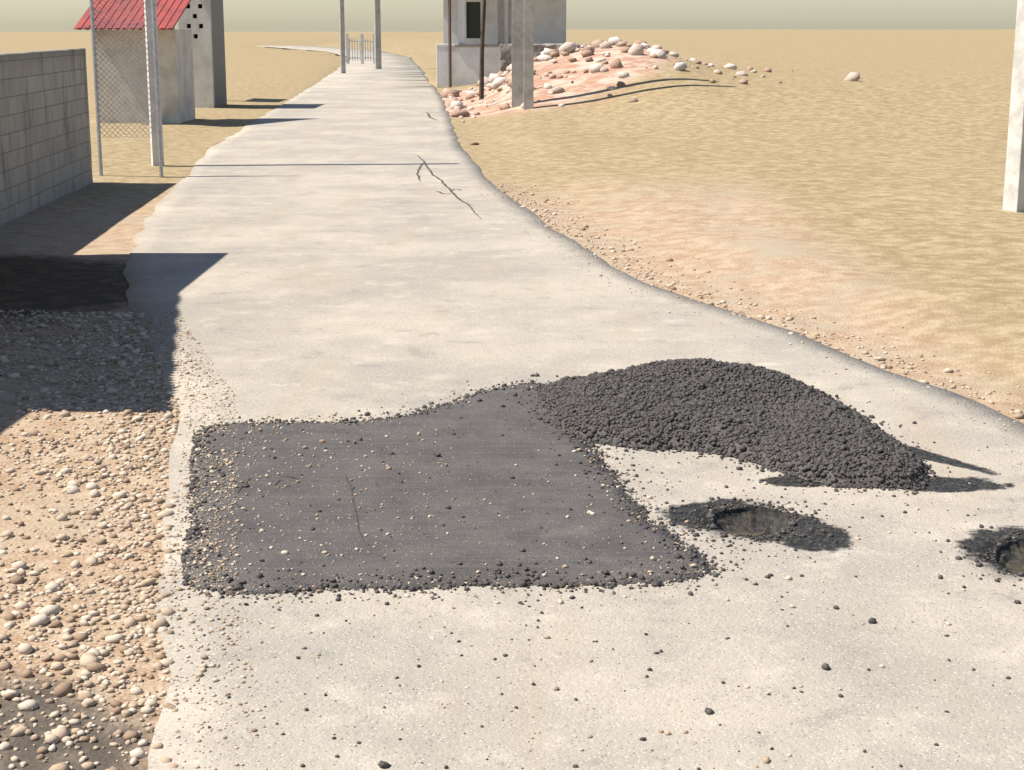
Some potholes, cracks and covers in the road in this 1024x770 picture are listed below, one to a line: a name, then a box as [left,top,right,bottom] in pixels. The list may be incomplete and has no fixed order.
crack [415,154,481,219]
pothole [714,507,790,537]
pothole [996,540,1024,574]
